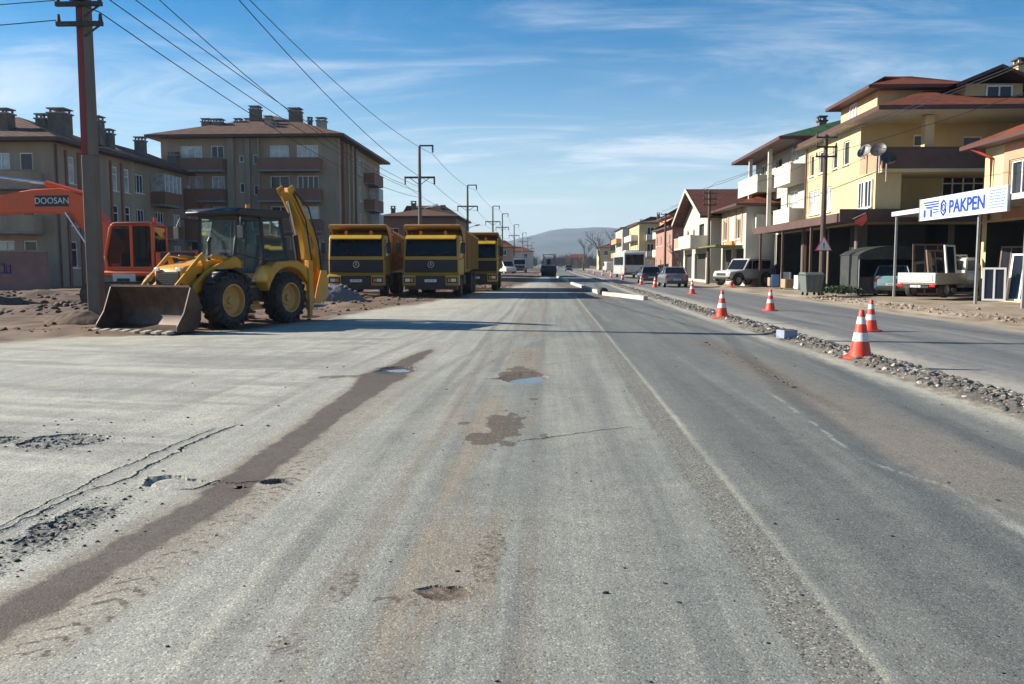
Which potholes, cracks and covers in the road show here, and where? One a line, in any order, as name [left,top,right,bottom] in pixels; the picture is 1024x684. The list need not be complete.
pothole [480,368,566,387]
pothole [358,364,434,377]
pothole [401,582,485,607]
pothole [0,435,32,446]
crack [515,425,638,443]
pothole [3,503,124,554]
crack [0,425,262,539]
pothole [252,477,295,487]
pothole [133,474,216,493]
crack [687,343,808,388]
pothole [5,432,124,452]
